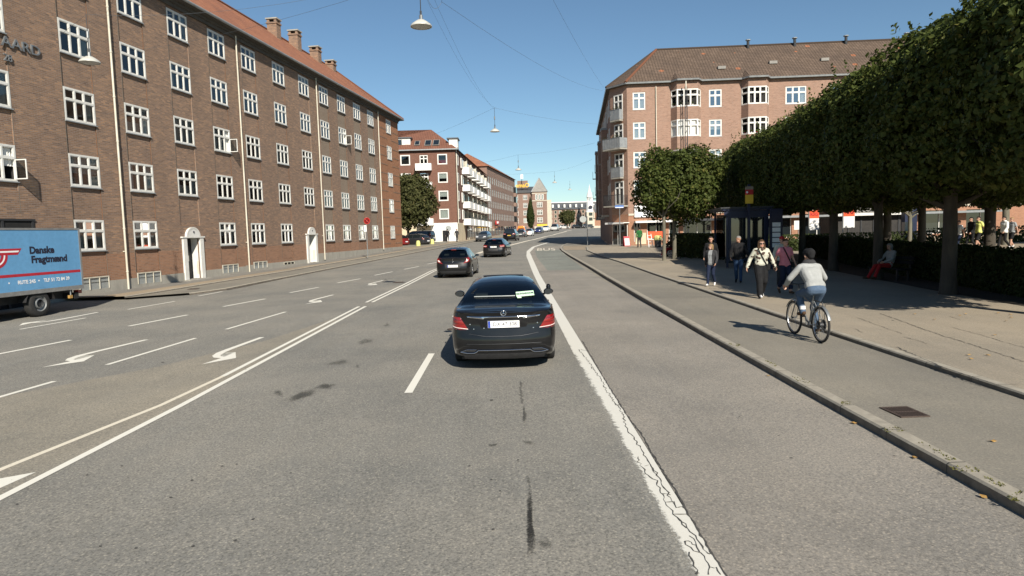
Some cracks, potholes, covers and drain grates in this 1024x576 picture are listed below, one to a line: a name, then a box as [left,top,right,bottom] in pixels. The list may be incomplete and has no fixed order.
drain grate [879,406,930,418]
crack [578,349,721,575]
